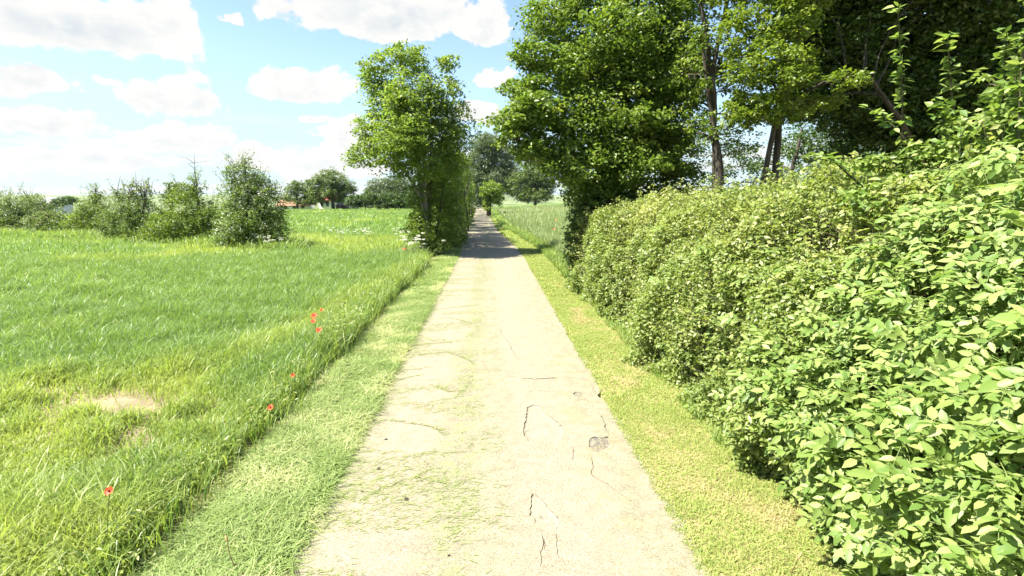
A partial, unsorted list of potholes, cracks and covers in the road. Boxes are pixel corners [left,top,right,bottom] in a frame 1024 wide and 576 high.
crack [540,530,566,566]
pothole [589,436,610,452]
